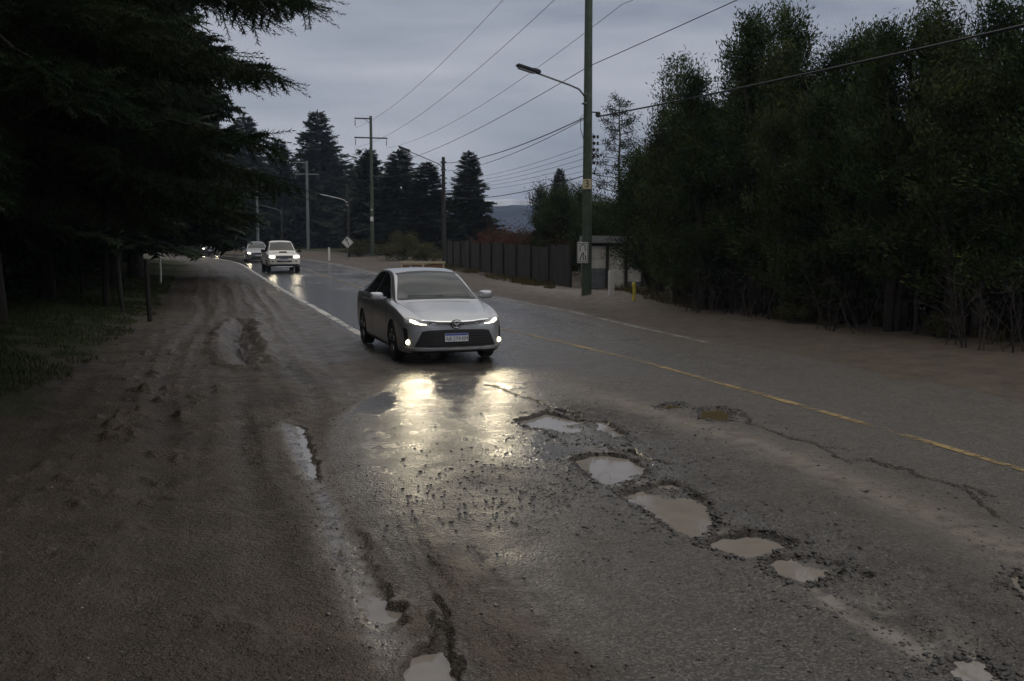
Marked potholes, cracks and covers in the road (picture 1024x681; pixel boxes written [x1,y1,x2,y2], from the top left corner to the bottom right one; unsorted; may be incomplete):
pothole [342,529,410,631]
pothole [704,528,801,561]
pothole [274,420,324,485]
pothole [567,452,652,487]
pothole [763,551,847,586]
crack [606,408,1005,519]
pothole [946,656,1006,681]
pothole [514,410,639,447]
pothole [618,479,723,540]
pothole [696,406,734,421]
crack [482,385,601,419]
pothole [393,618,466,681]
